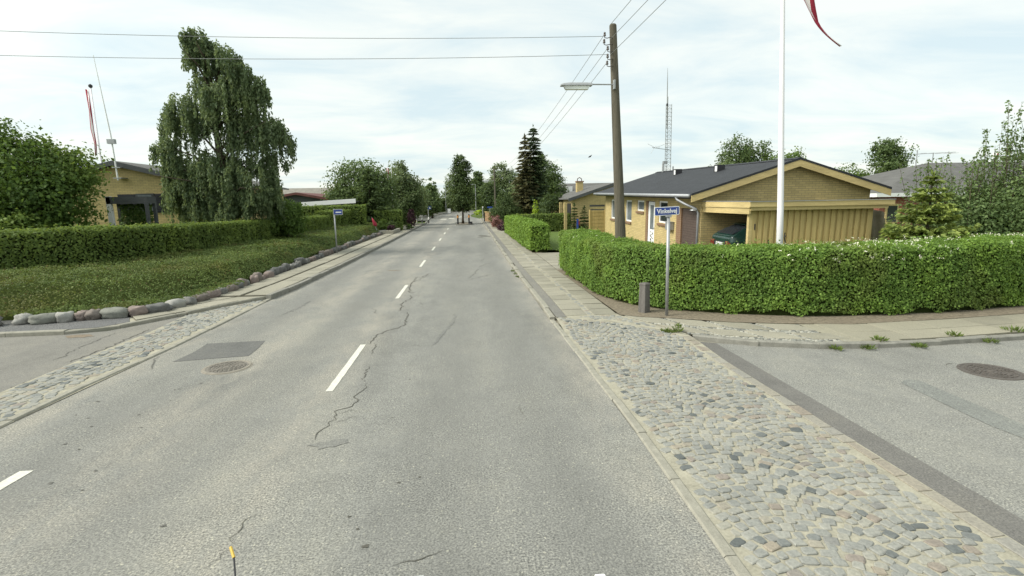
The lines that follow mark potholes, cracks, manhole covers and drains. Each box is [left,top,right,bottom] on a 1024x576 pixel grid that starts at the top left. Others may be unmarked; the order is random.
manhole cover [201,360,253,375]
crack [315,257,432,438]
manhole cover [957,363,1024,381]
crack [417,313,457,346]
